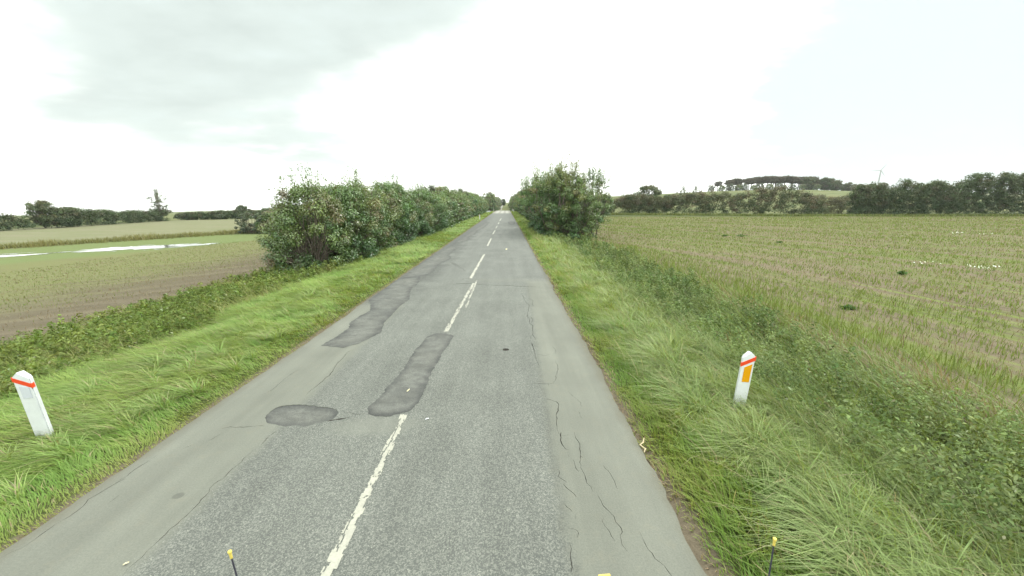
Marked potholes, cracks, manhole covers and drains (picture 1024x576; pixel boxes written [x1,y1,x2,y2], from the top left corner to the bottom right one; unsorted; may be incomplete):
crack [522,295,627,571]
